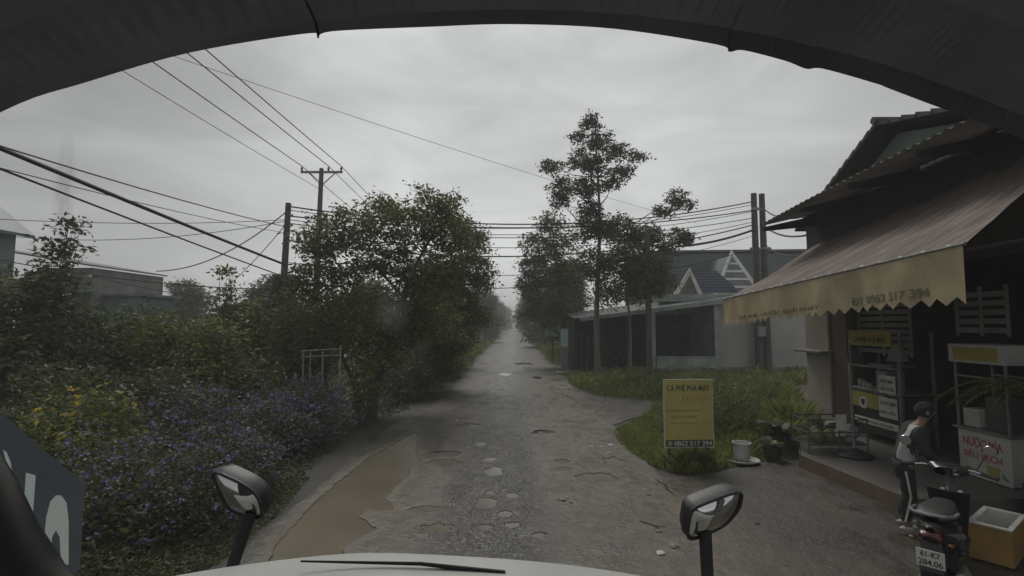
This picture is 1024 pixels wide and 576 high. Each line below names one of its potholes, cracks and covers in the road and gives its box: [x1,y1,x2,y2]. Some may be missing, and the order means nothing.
pothole [474,497,498,509]
pothole [483,466,504,476]
